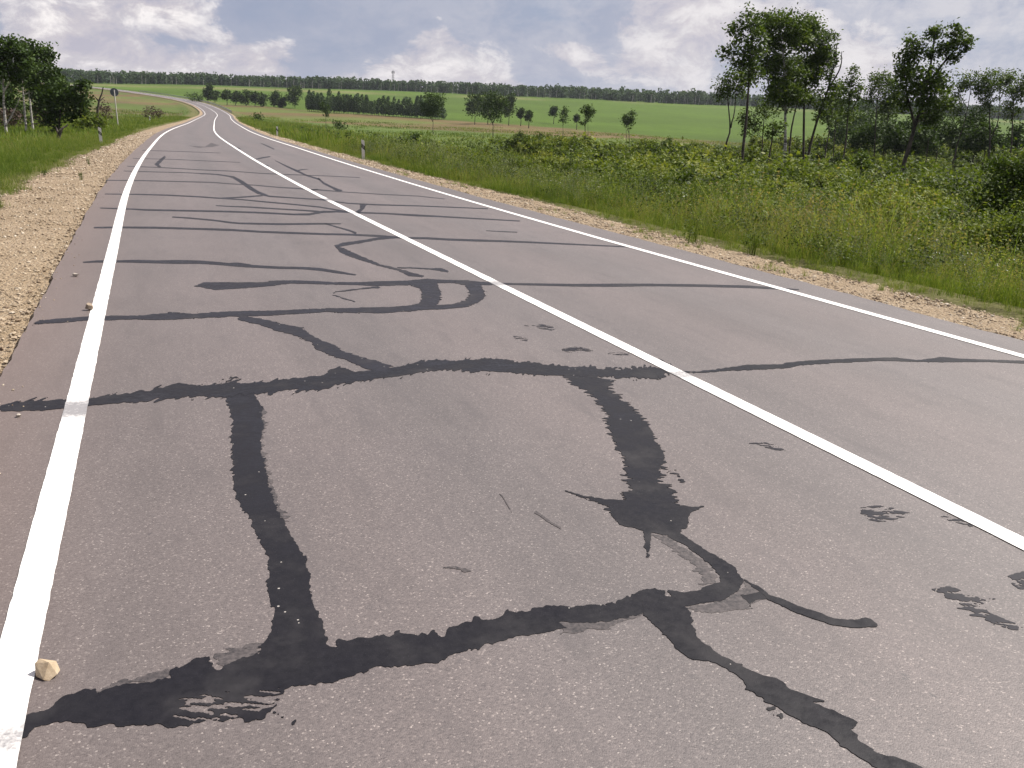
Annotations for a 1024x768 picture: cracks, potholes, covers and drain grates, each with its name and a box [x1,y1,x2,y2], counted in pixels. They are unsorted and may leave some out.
crack [100,150,520,233]
crack [534,511,561,529]
crack [83,260,356,275]
